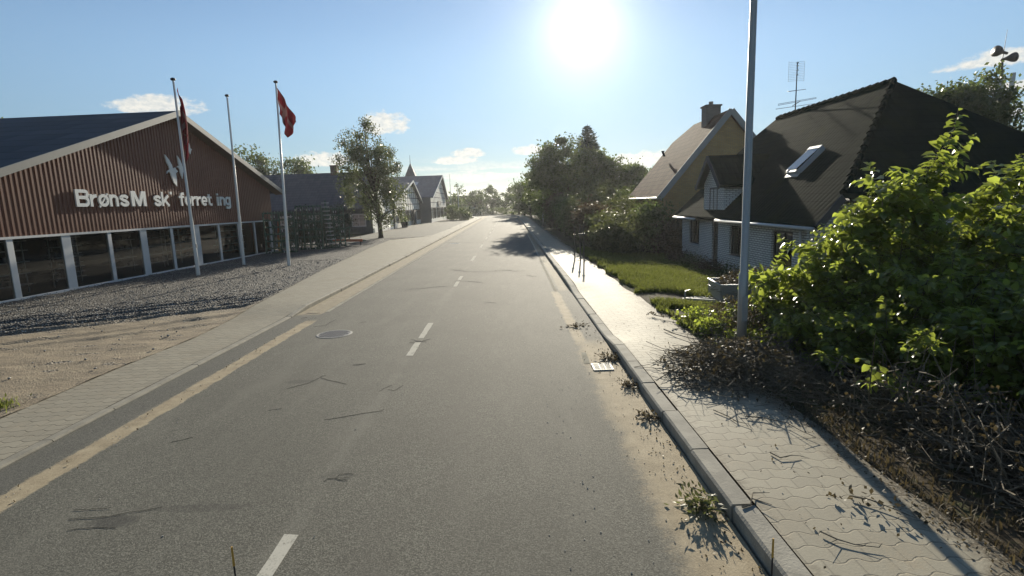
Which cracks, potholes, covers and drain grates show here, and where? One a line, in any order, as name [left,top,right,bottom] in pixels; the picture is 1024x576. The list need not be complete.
manhole cover [316,330,353,338]
drain grate [591,363,614,371]
